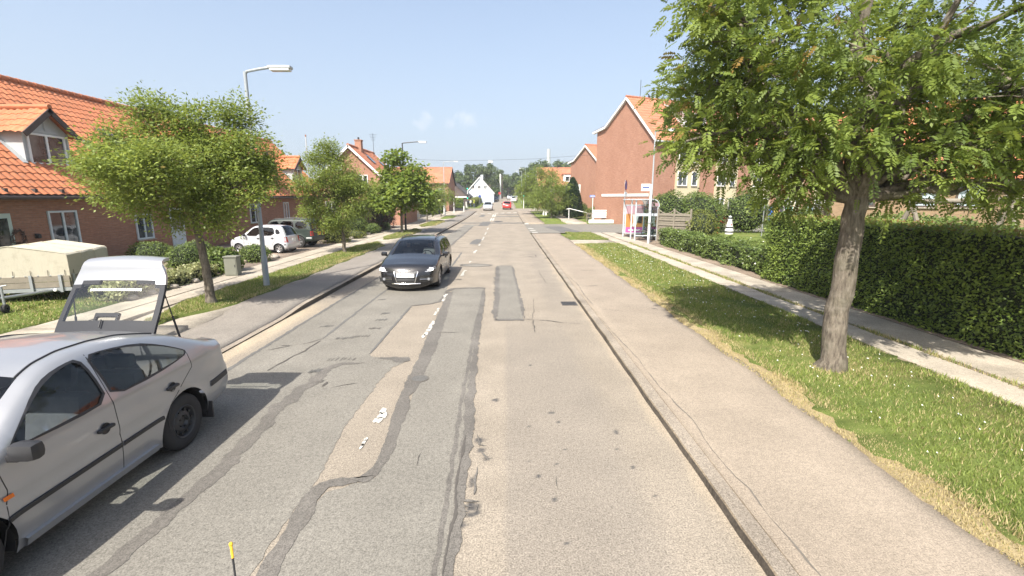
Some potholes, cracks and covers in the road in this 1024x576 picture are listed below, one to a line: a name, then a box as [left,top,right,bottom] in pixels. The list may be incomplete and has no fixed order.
crack [267,338,323,371]
